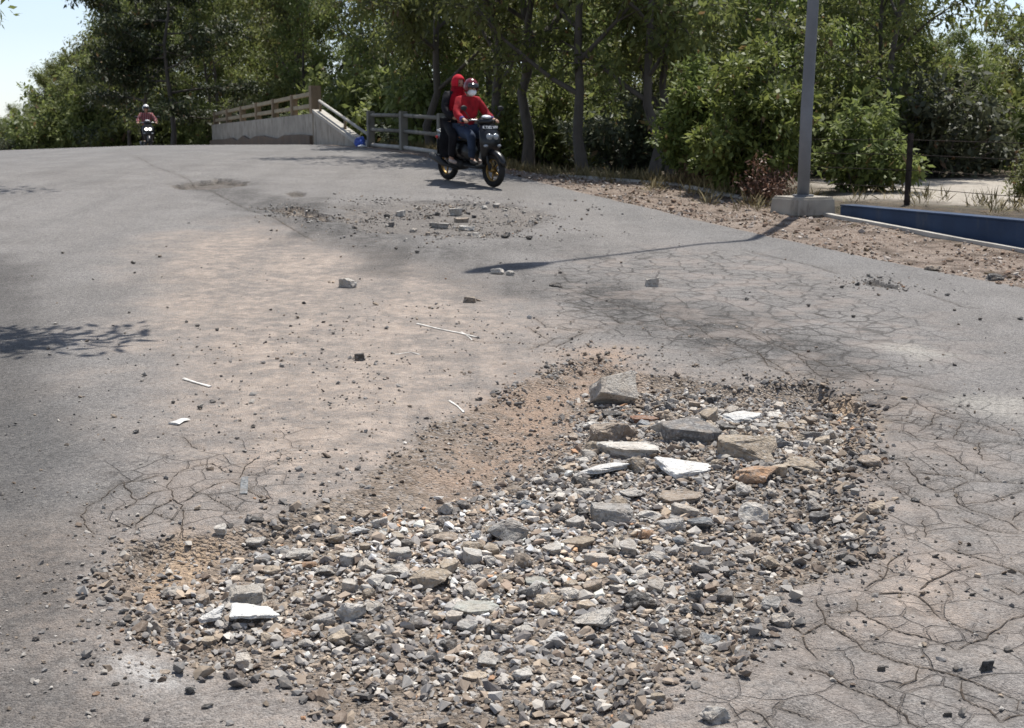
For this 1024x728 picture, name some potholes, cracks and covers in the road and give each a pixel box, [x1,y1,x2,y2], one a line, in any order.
crack [80,437,261,538]
pothole [332,200,552,239]
crack [870,384,1022,536]
crack [528,289,873,390]
pothole [169,179,250,190]
crack [792,549,1024,728]
pothole [102,356,881,728]
